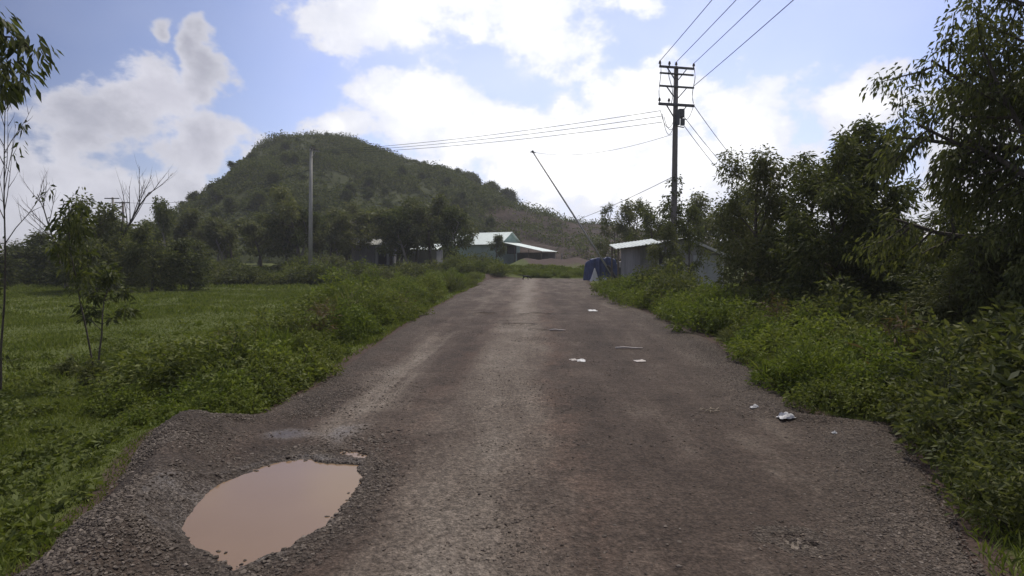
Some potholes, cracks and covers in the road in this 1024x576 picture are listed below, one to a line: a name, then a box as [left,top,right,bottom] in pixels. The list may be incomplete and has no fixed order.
pothole [126,452,377,576]
pothole [309,446,380,465]
